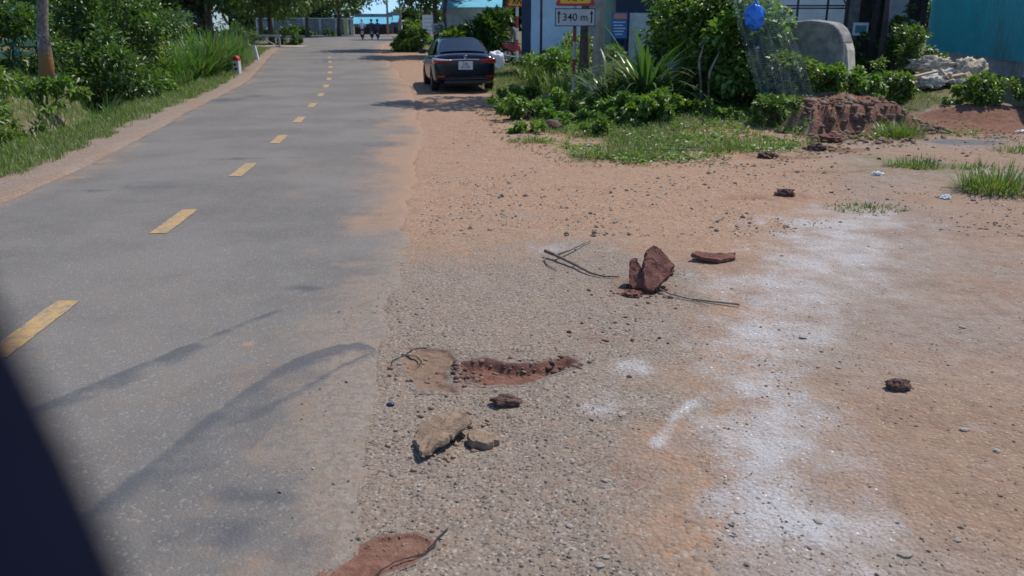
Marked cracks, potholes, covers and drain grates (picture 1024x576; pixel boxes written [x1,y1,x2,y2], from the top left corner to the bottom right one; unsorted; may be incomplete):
pothole [454,354,584,388]
pothole [311,530,438,576]
